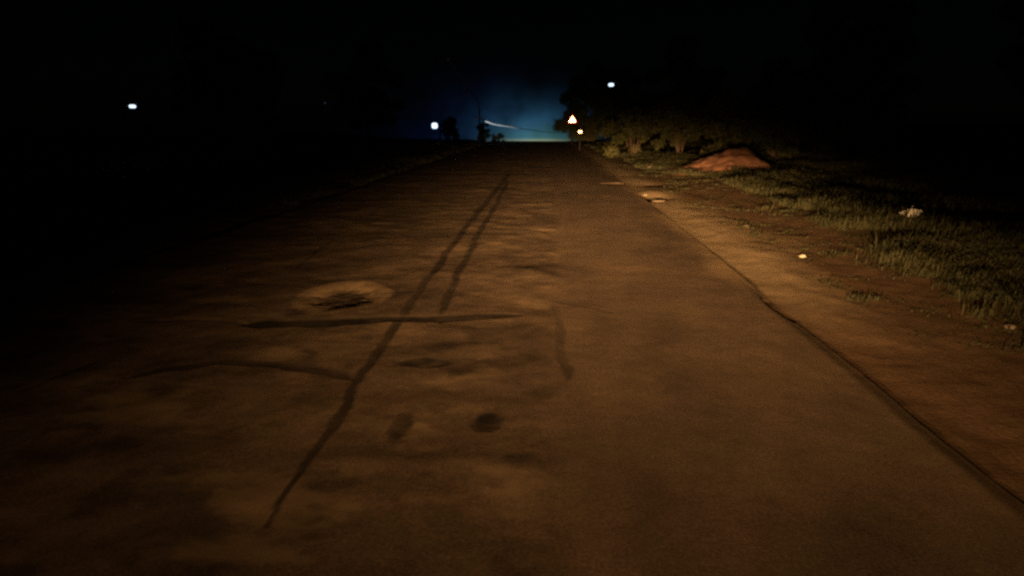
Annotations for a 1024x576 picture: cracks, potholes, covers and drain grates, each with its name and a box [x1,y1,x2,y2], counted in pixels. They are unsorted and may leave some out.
pothole [384,412,415,445]
pothole [469,410,505,432]
crack [121,173,523,528]
pothole [291,281,394,314]
crack [546,298,618,381]
pothole [393,356,457,369]
